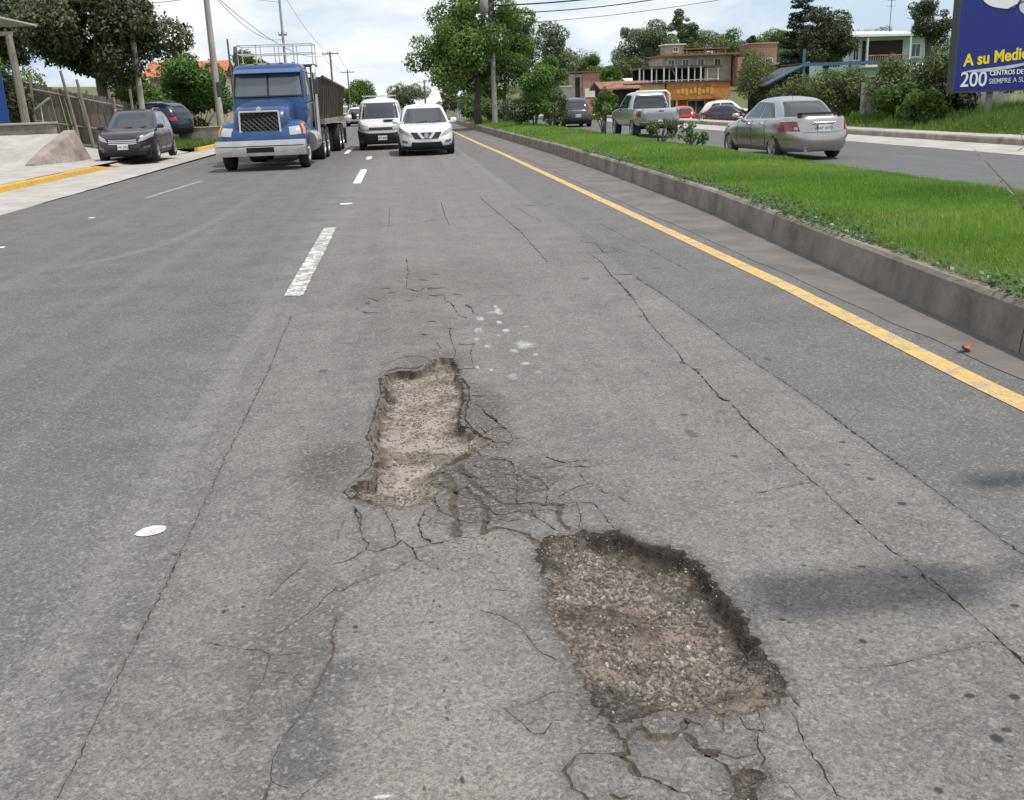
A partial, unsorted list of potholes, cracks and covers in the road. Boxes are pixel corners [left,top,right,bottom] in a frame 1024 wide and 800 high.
crack [210,559,337,800]
crack [333,259,628,591]
crack [505,691,848,800]
pothole [535,529,789,723]
pothole [348,357,504,507]
crack [481,610,567,666]
crack [580,241,1024,669]
